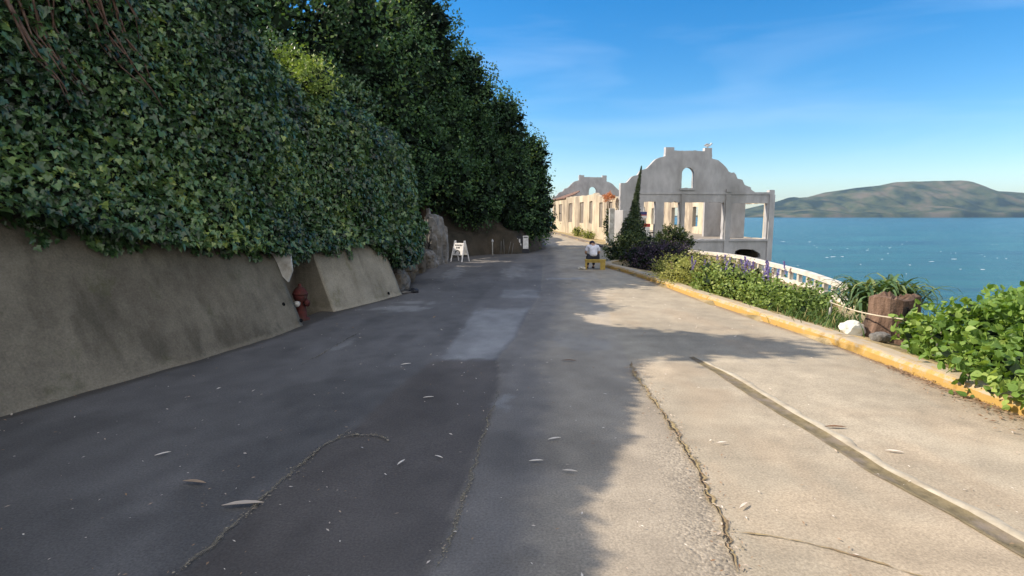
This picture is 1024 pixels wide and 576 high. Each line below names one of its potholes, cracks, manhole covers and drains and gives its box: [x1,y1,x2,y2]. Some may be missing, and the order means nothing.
crack [630,362,745,572]
crack [436,392,500,566]
crack [172,425,389,574]
